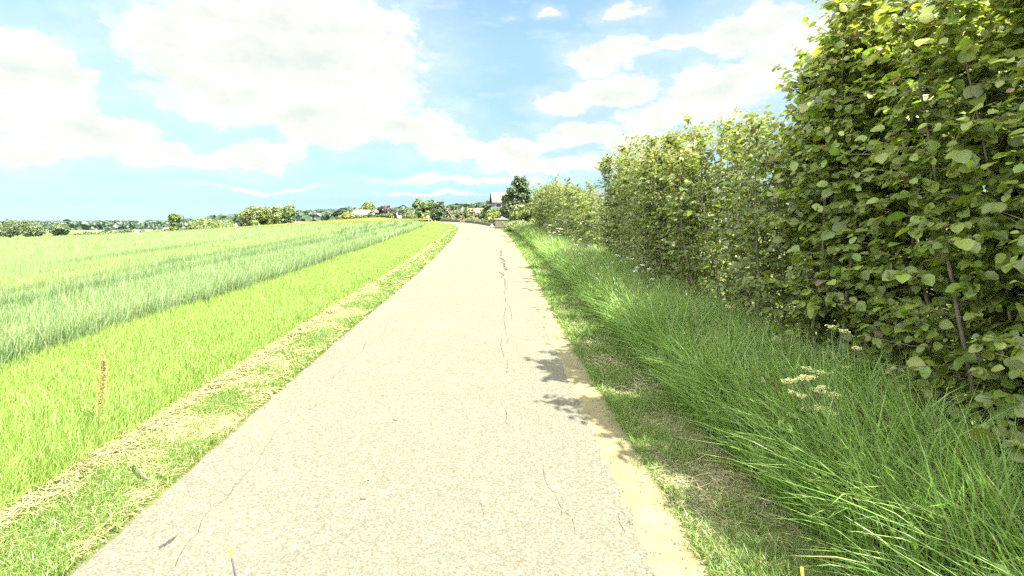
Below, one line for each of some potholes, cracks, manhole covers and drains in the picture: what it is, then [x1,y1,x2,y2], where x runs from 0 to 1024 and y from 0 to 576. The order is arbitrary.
crack [498,250,512,421]
crack [166,300,409,576]
